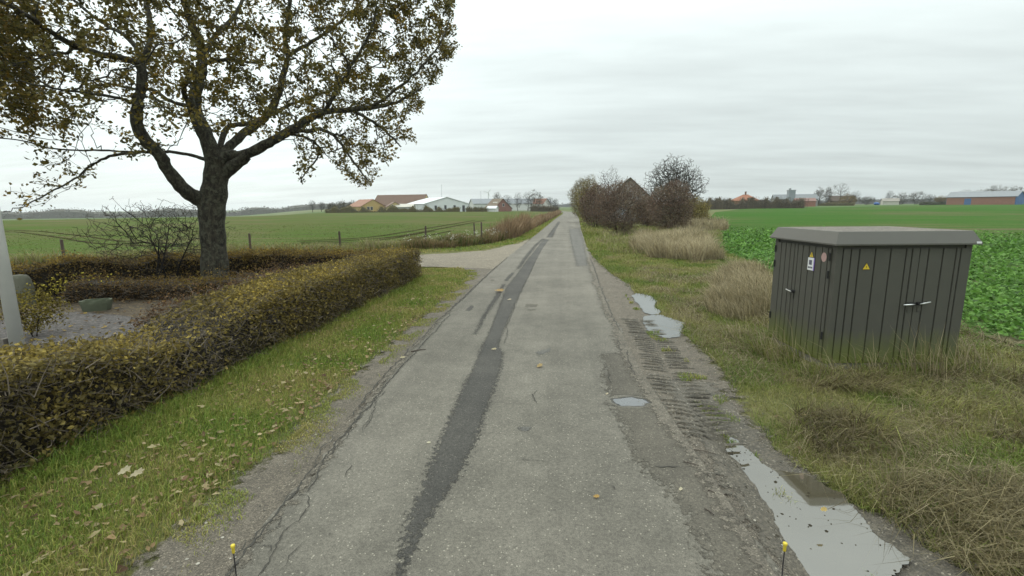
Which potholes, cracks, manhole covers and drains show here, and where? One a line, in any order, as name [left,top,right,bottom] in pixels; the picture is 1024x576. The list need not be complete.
pothole [610,396,651,406]
crack [226,258,507,576]
